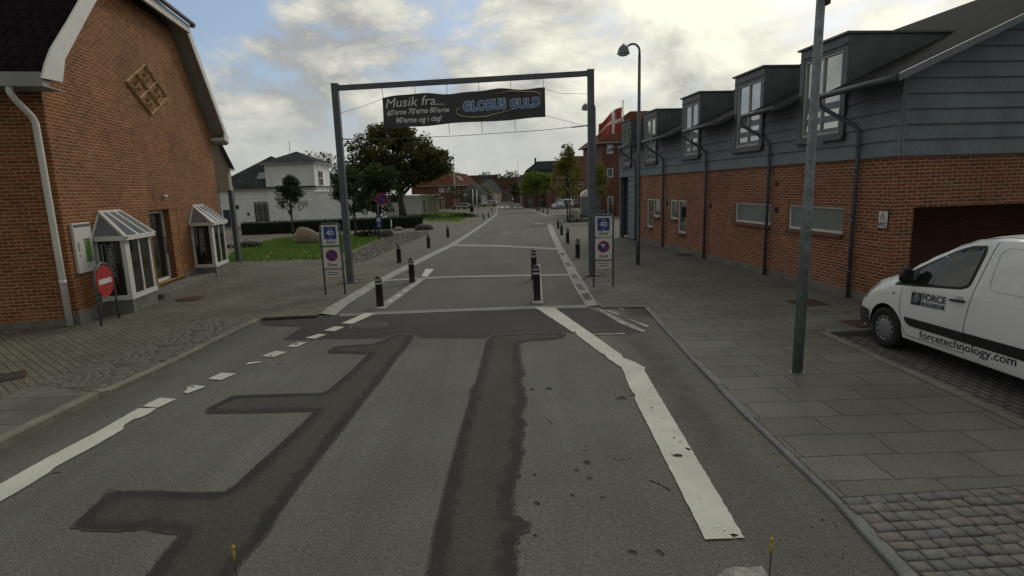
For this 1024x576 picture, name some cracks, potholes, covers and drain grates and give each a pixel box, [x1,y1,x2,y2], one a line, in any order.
utility cover [838,319,871,328]
manhole cover [348,321,389,331]
